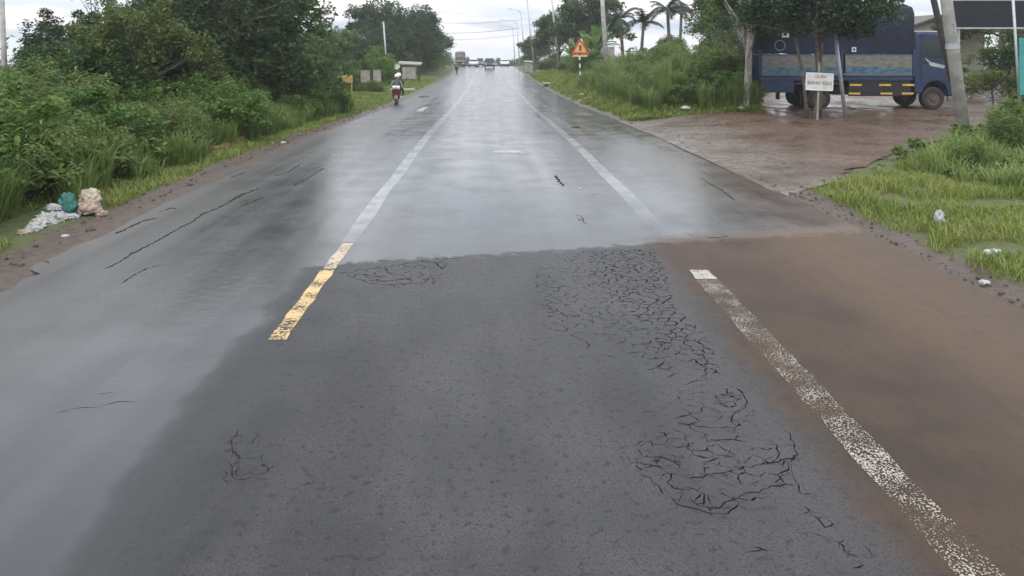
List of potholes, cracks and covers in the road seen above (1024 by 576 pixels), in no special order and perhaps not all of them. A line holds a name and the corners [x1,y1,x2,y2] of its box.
crack [535,249,720,391]
crack [625,388,872,569]
crack [346,257,460,287]
crack [59,392,131,413]
crack [668,142,735,200]
crack [222,431,314,486]
crack [105,165,324,283]
